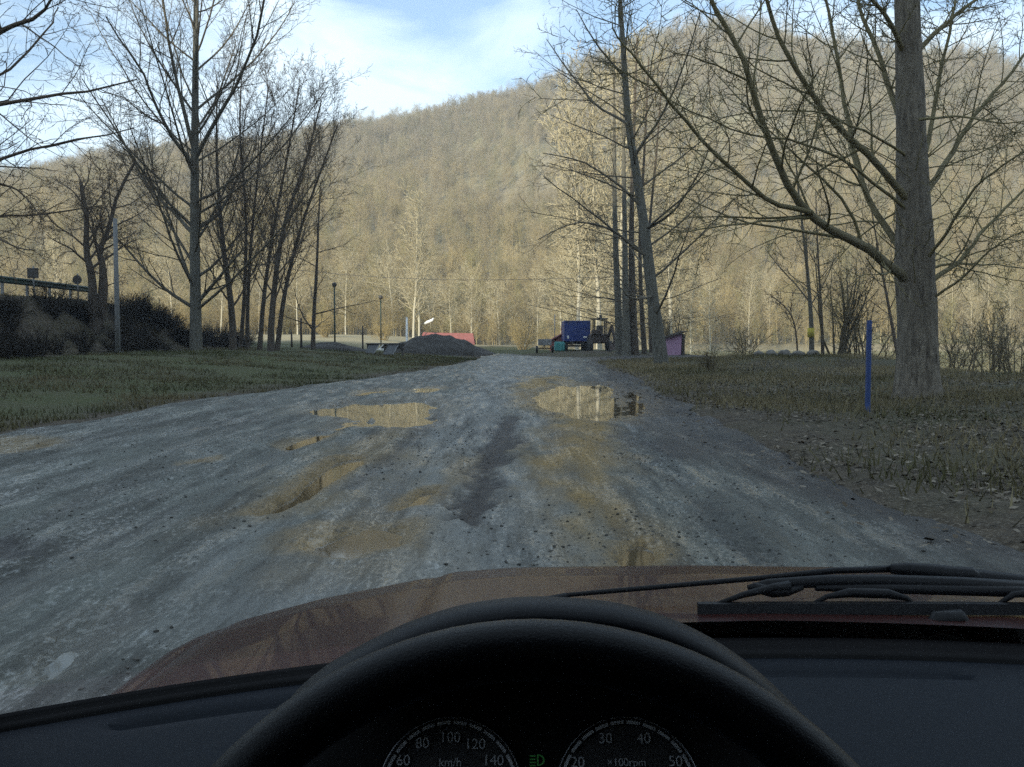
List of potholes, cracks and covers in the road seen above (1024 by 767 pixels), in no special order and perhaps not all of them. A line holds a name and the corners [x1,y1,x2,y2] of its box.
pothole [238,453,374,516]
pothole [282,517,428,559]
pothole [0,435,65,454]
pothole [291,395,455,431]
pothole [280,432,337,450]
pothole [510,381,631,422]
pothole [606,534,675,566]
